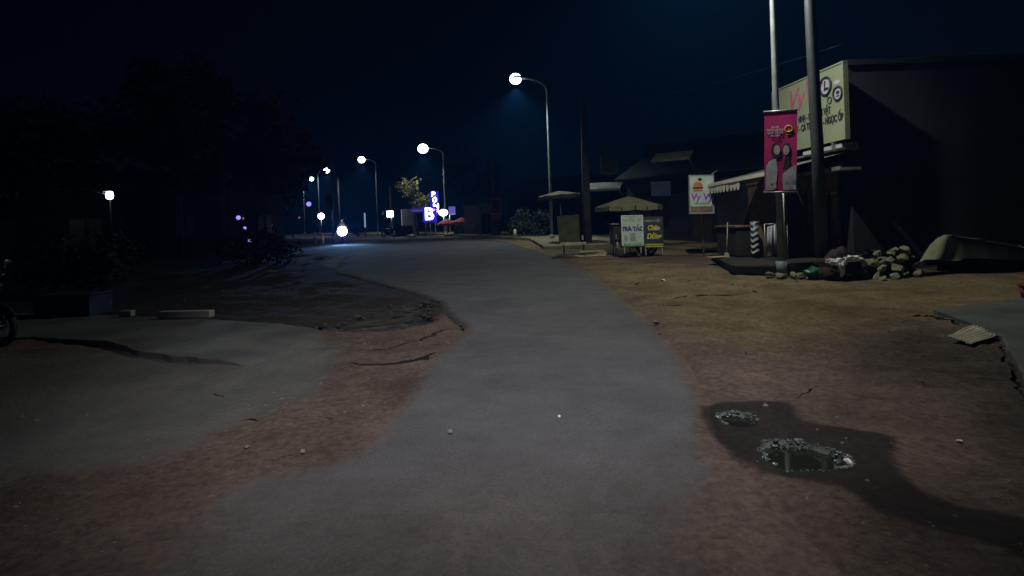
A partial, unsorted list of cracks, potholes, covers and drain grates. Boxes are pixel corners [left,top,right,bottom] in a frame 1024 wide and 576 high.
crack [350,328,453,380]
pothole [757,438,856,473]
pothole [714,410,759,427]
